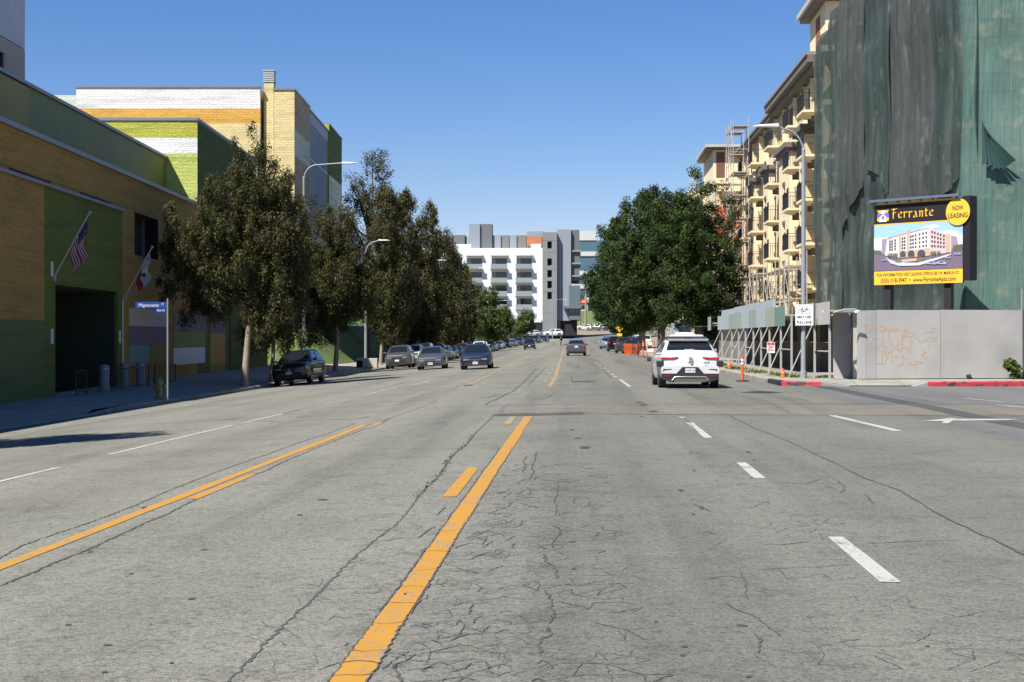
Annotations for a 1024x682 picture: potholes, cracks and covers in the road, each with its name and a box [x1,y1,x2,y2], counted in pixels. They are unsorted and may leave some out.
crack [201,390,1024,682]
crack [485,364,579,413]
